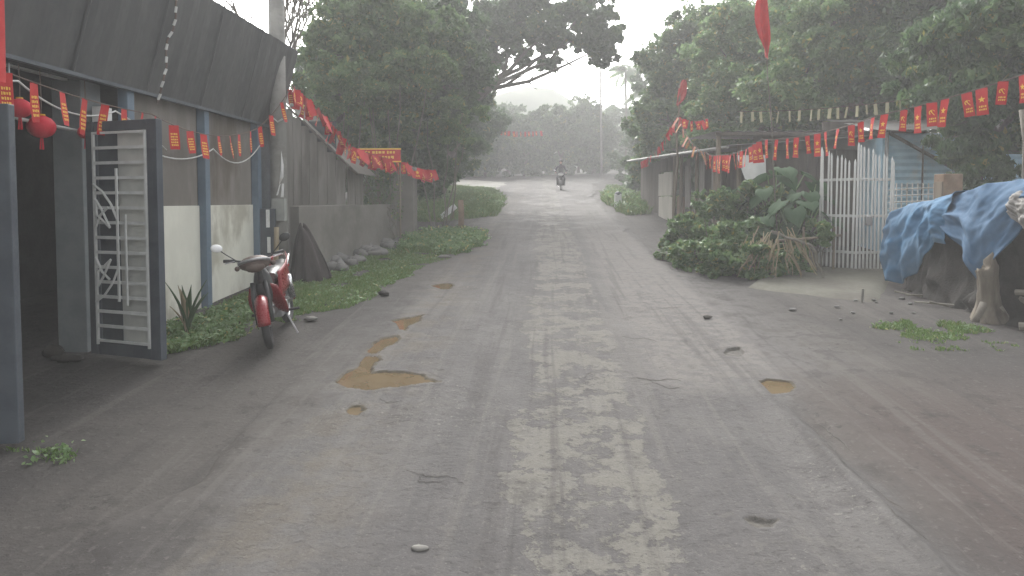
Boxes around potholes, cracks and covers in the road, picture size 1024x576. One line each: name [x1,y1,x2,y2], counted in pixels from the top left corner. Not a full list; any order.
pothole [713,345,755,359]
pothole [749,376,806,398]
pothole [325,353,449,394]
pothole [385,313,431,334]
pothole [357,334,411,357]
pothole [426,282,460,291]
pothole [332,401,376,420]
